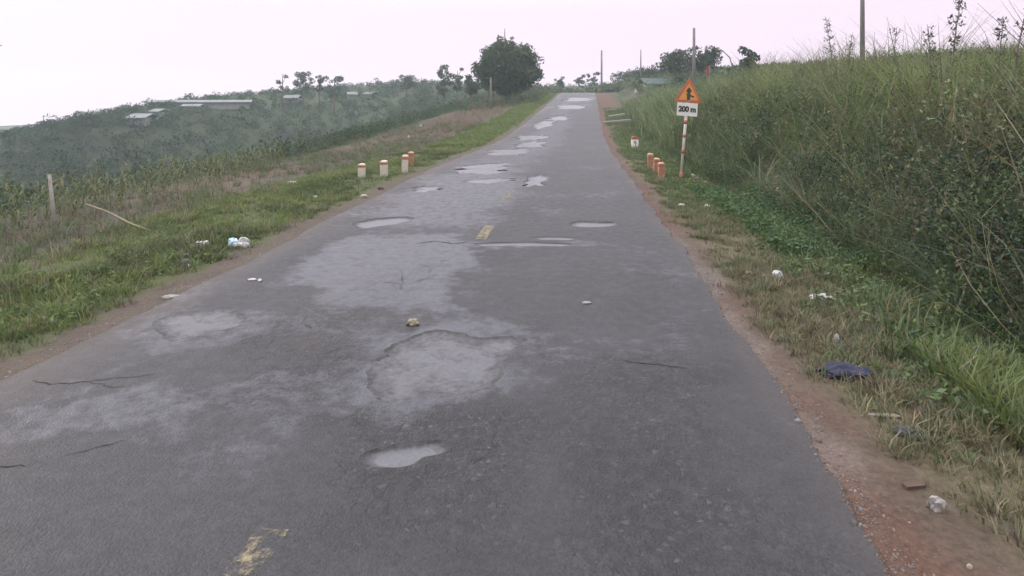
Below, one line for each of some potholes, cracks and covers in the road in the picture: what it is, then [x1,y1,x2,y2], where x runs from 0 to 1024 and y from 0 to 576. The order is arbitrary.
crack [370,241,464,290]
pothole [532,120,555,129]
pothole [352,216,416,228]
crack [0,439,128,467]
pothole [365,329,529,403]
crack [34,373,158,387]
pothole [454,162,515,175]
pothole [522,174,550,187]
pothole [359,439,449,468]
